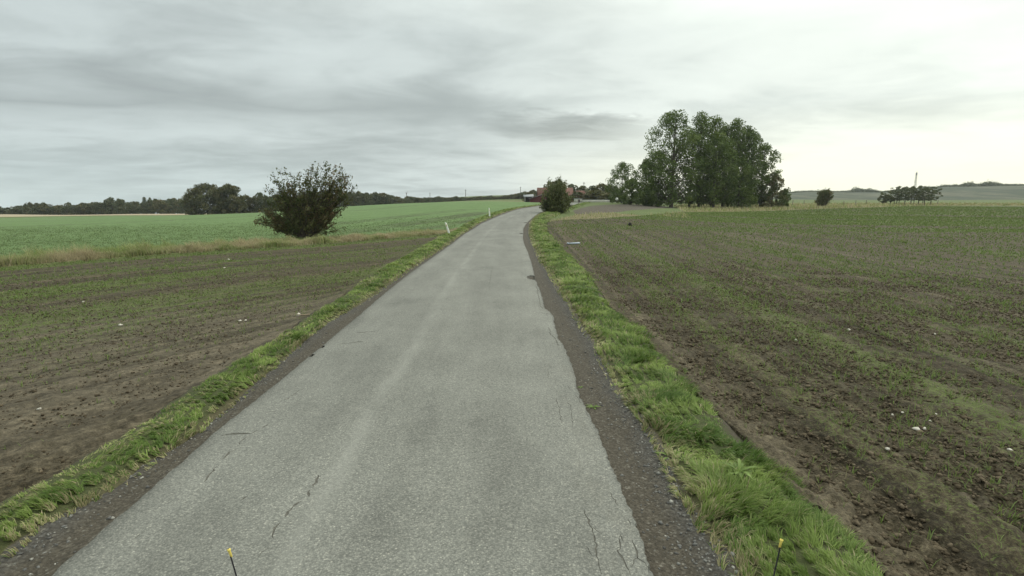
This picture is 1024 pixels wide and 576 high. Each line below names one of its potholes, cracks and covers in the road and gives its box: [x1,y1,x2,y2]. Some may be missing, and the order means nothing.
crack [204,388,304,482]
crack [258,475,319,557]
crack [584,510,649,574]
